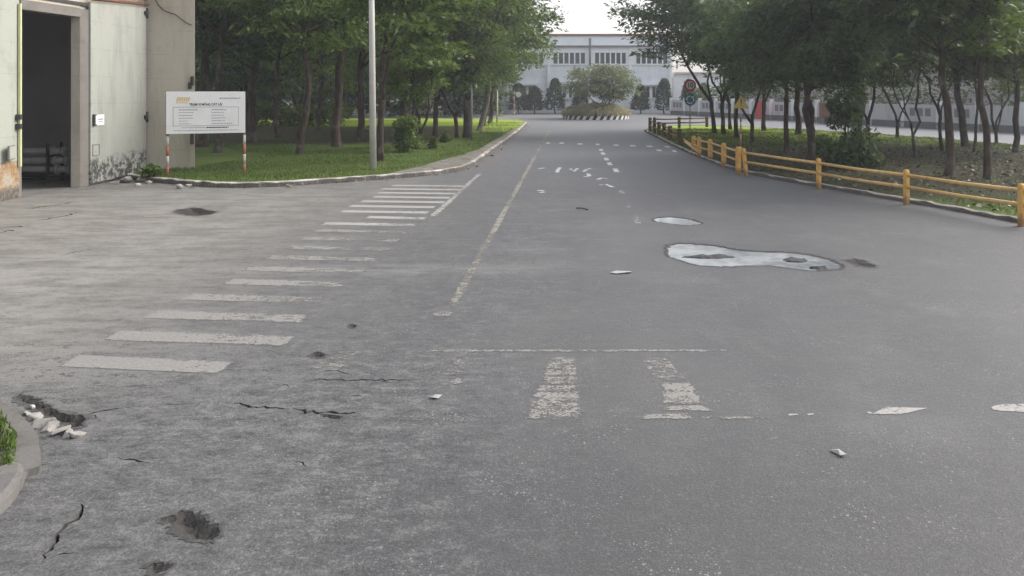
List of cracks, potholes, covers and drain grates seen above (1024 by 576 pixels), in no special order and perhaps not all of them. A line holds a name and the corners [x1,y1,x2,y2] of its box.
pothole [171,207,220,217]
crack [41,505,84,562]
pothole [842,258,879,268]
pothole [155,507,226,544]
crack [234,370,414,419]
pothole [12,393,92,429]
pothole [140,559,178,576]
